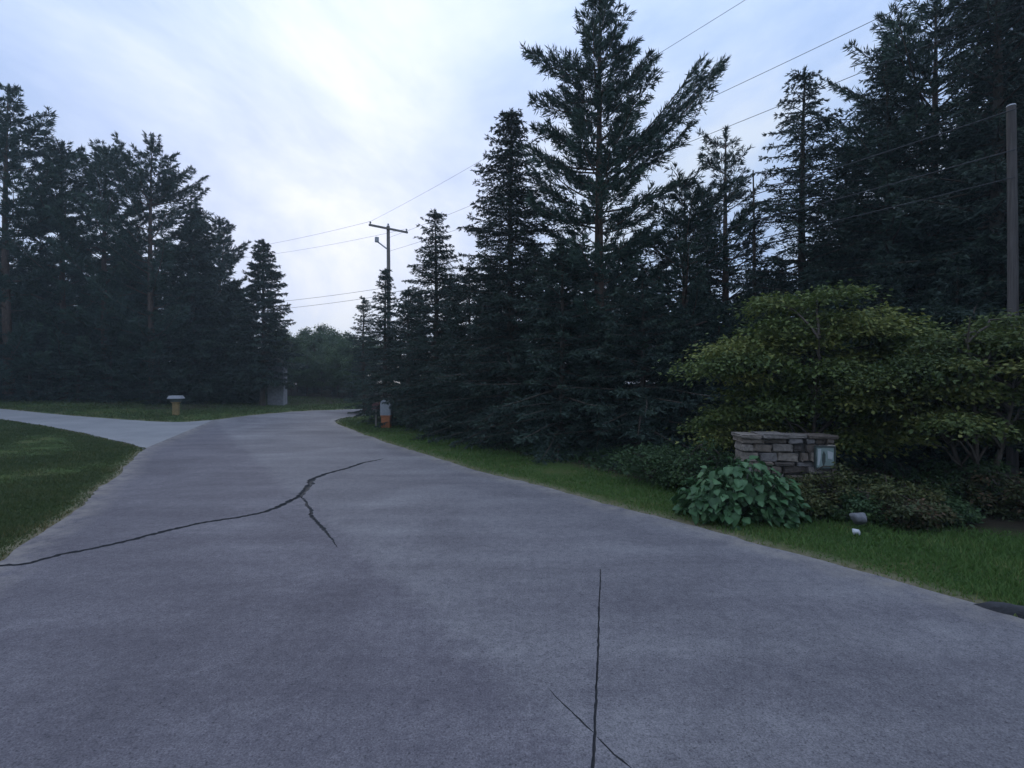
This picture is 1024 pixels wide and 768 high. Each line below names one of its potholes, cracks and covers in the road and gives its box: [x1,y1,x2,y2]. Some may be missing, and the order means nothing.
crack [0,458,384,567]
crack [550,570,631,768]
